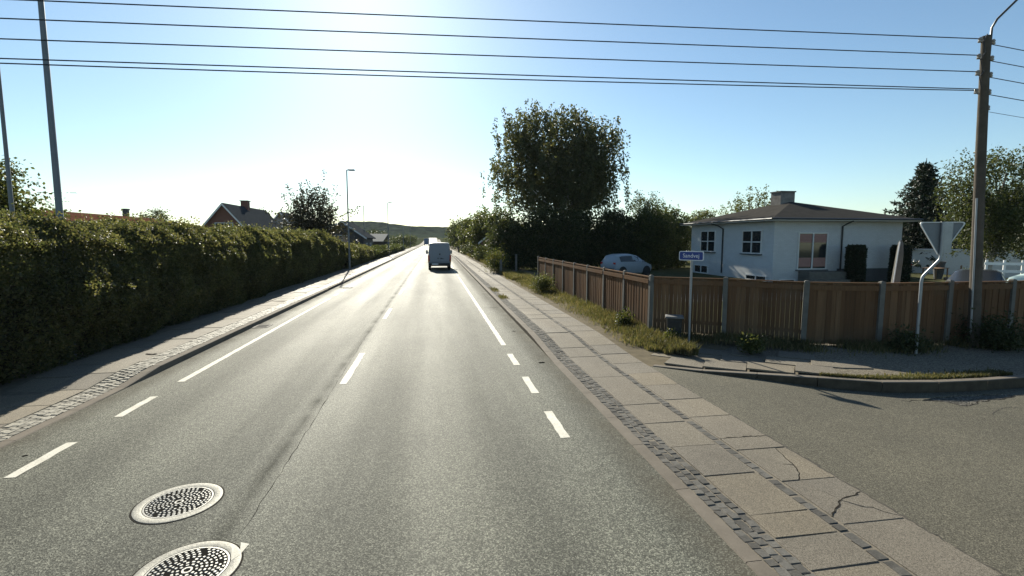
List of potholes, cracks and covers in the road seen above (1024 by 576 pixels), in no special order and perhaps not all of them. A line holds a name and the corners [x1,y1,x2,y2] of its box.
manhole cover [132,540,244,576]
crack [723,435,800,480]
manhole cover [129,483,225,525]
crack [831,491,862,517]
